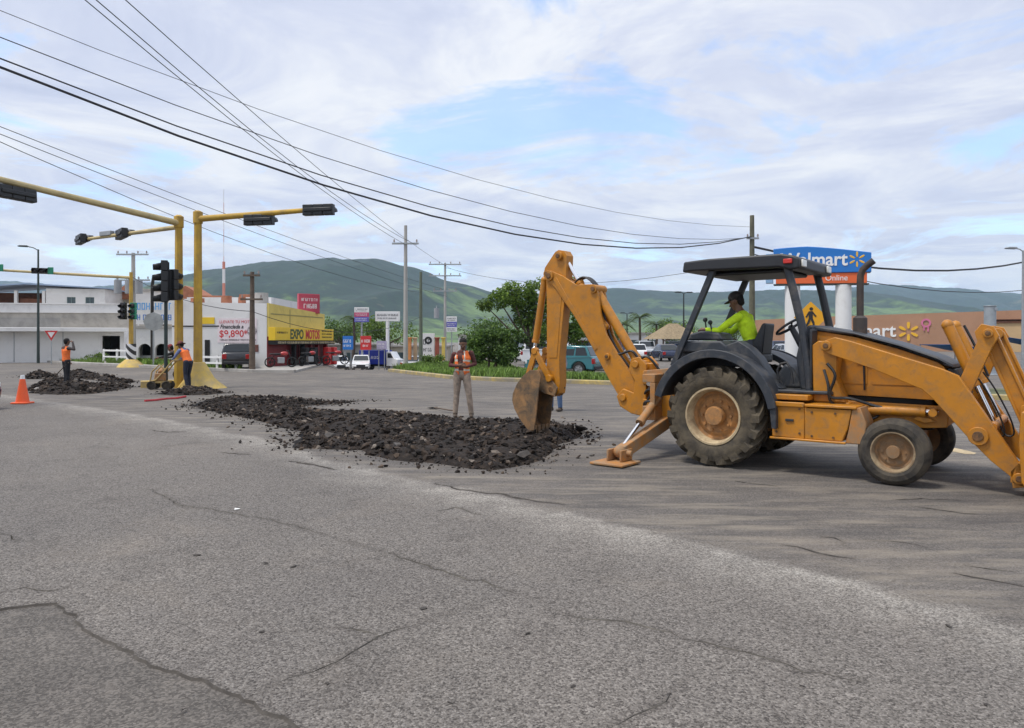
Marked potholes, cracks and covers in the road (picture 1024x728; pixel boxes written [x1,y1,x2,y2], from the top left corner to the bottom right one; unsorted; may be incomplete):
crack [151,489,317,533]
crack [435,483,564,515]
crack [276,624,417,684]
crack [388,552,514,593]
crack [787,537,855,559]
crack [570,615,867,683]
crack [955,565,1024,587]
